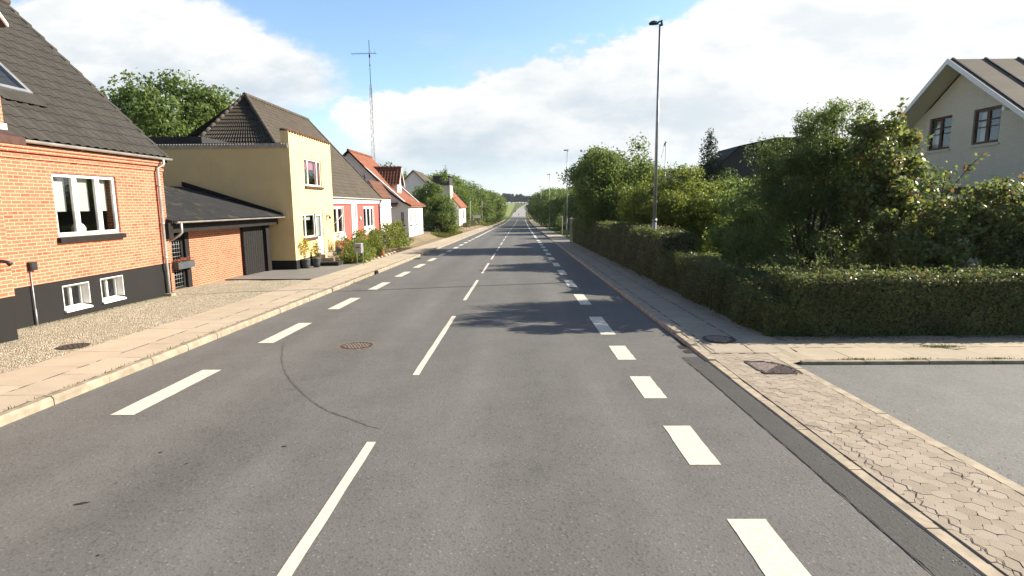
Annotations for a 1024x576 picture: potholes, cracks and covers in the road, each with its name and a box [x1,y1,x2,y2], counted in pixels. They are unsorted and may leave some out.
manhole cover [744,361,800,375]
crack [281,344,380,429]
manhole cover [334,341,379,351]
